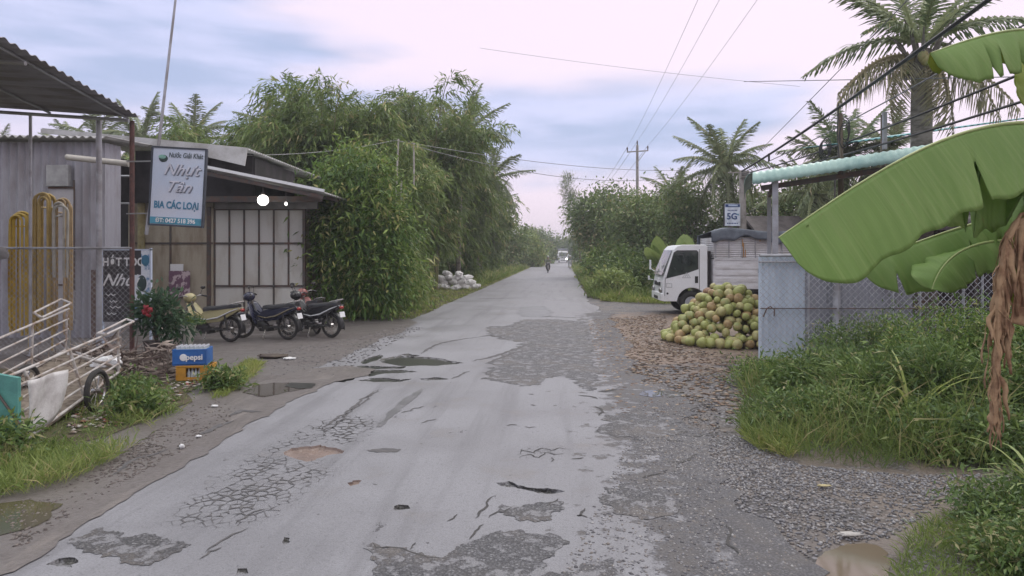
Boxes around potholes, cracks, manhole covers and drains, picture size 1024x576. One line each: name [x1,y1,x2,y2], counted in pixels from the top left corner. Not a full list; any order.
crack [121,390,382,564]
pothole [284,445,344,462]
pothole [378,356,462,366]
crack [726,524,744,556]
crack [520,445,584,462]
